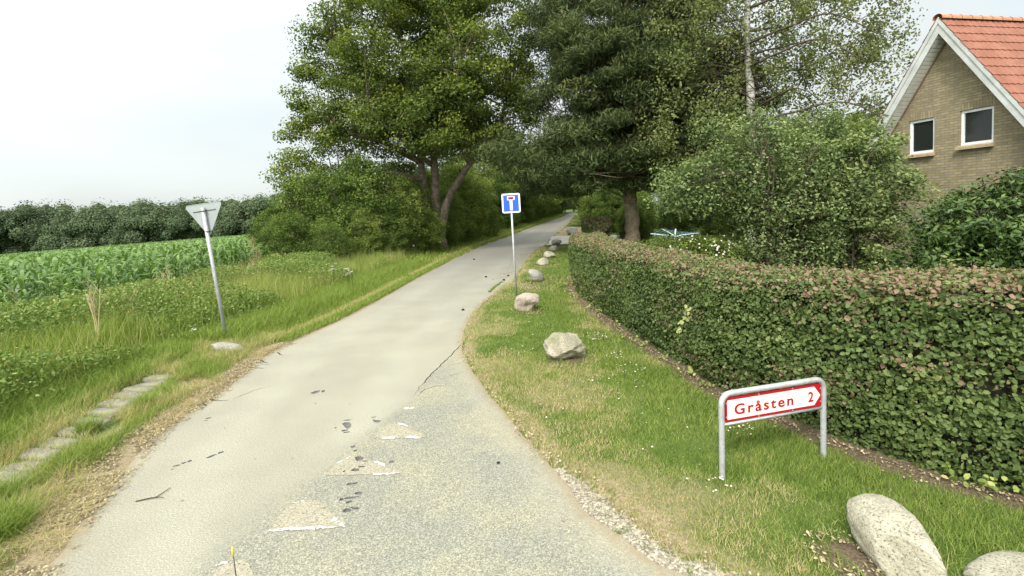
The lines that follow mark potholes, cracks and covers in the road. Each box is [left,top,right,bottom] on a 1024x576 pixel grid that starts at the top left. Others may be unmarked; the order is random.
pothole [339,482,362,513]
